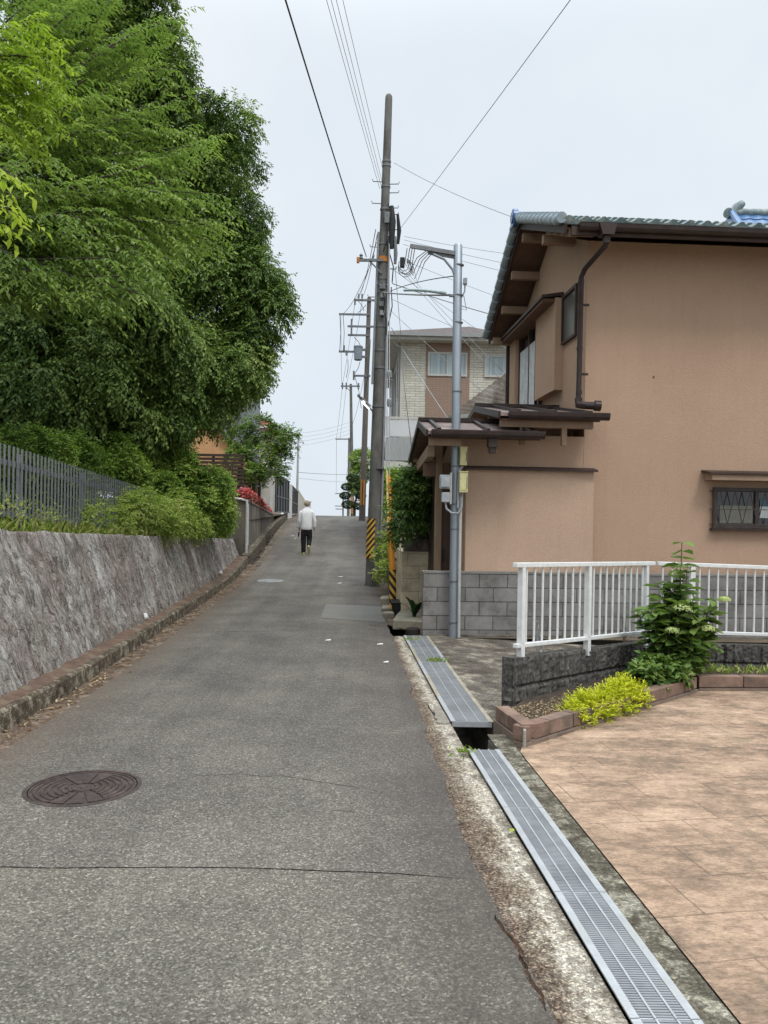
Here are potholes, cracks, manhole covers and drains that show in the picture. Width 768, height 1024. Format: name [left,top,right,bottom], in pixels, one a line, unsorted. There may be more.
manhole cover [22,770,142,807]
crack [494,916,546,1011]
drain grate [554,891,700,1021]
drain grate [468,749,543,814]
drain grate [425,674,474,697]
drain grate [417,661,457,678]
drain grate [409,646,447,662]
drain grate [503,807,606,900]
drain grate [404,635,436,647]
